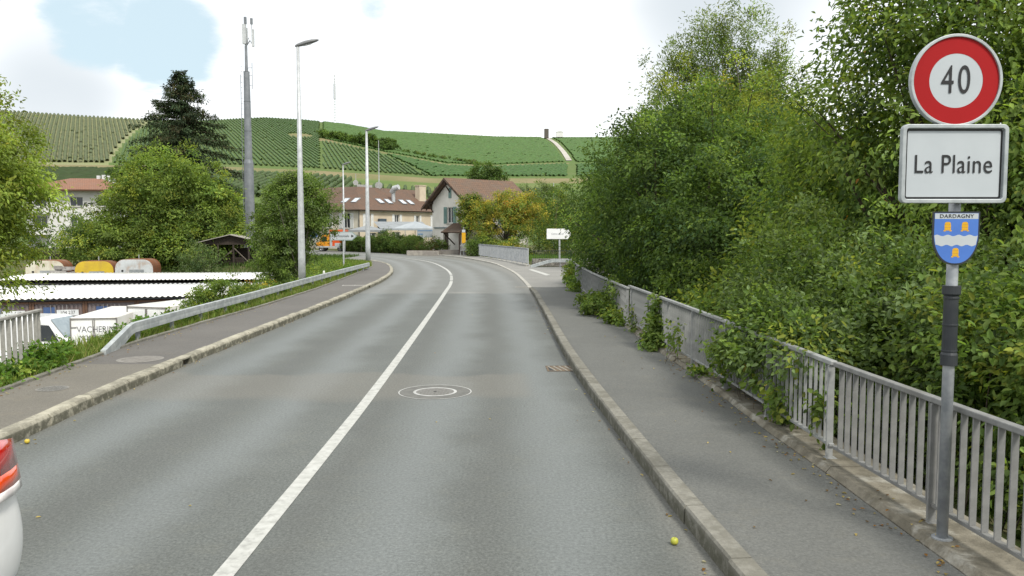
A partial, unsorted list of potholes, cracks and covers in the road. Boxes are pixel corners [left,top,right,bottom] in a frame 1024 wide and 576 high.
drain grate [173,355,191,367]
manhole cover [398,385,472,399]
